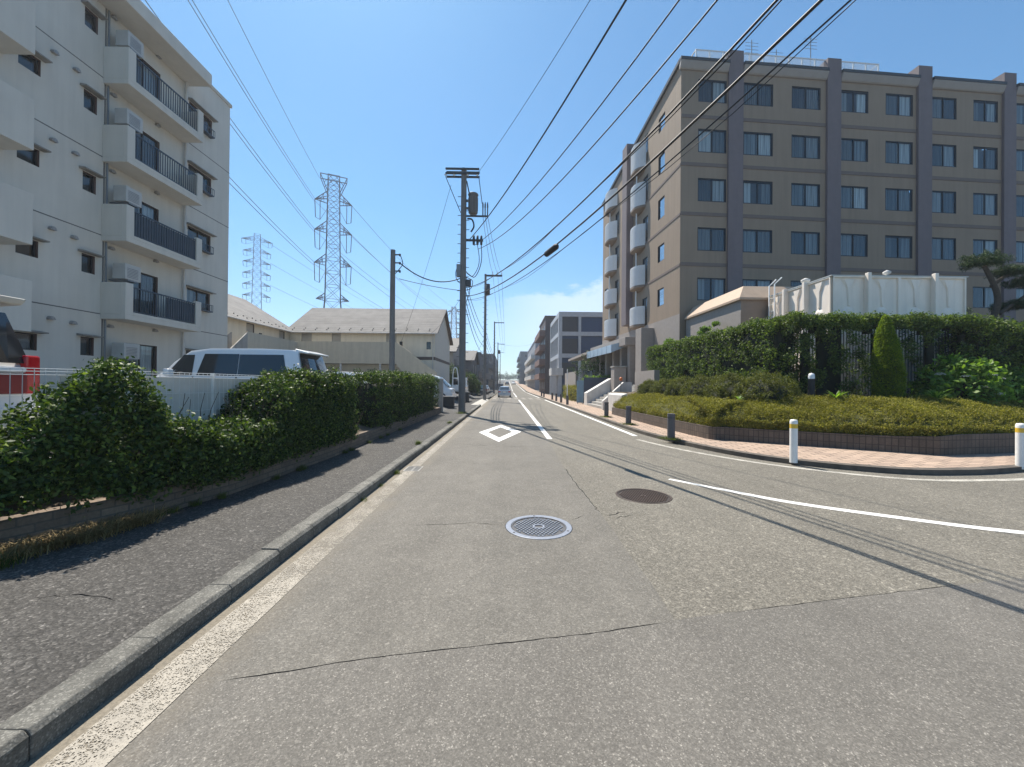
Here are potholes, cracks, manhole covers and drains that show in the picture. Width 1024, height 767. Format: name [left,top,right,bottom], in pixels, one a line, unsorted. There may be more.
manhole cover [616,488,672,504]
manhole cover [506,515,572,540]
